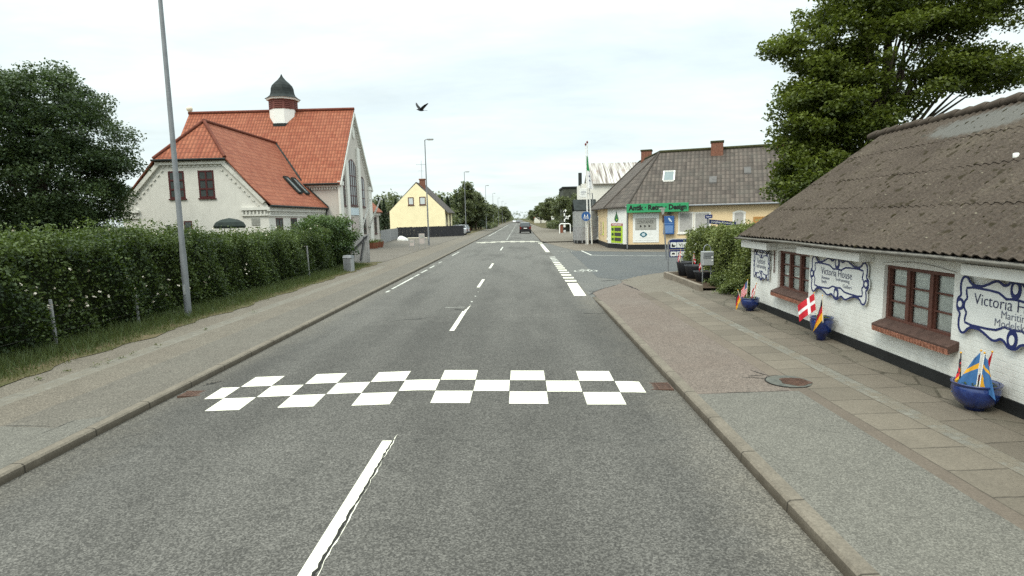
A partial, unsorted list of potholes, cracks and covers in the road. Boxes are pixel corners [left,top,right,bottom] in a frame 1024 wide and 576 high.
manhole cover [765,375,813,388]
drain grate [177,390,206,398]
drain grate [651,382,674,391]
